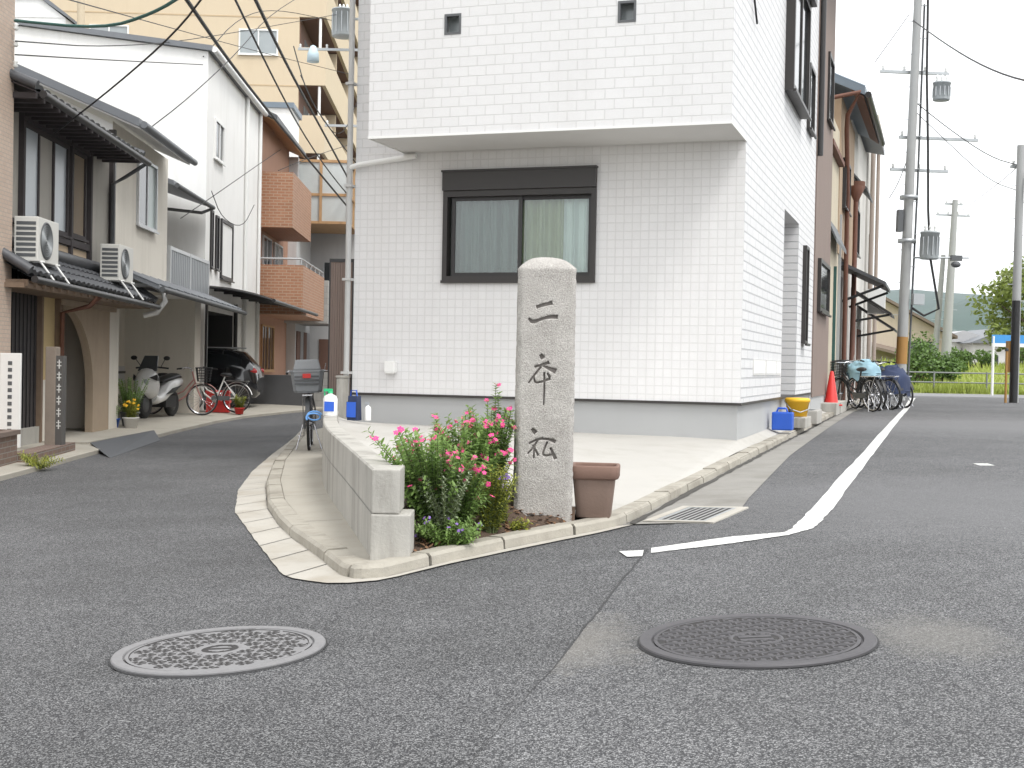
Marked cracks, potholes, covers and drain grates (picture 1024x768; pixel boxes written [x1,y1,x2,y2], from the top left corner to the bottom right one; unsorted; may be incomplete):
manhole cover [108,626,328,678]
drain grate [642,506,749,524]
manhole cover [637,614,879,669]
